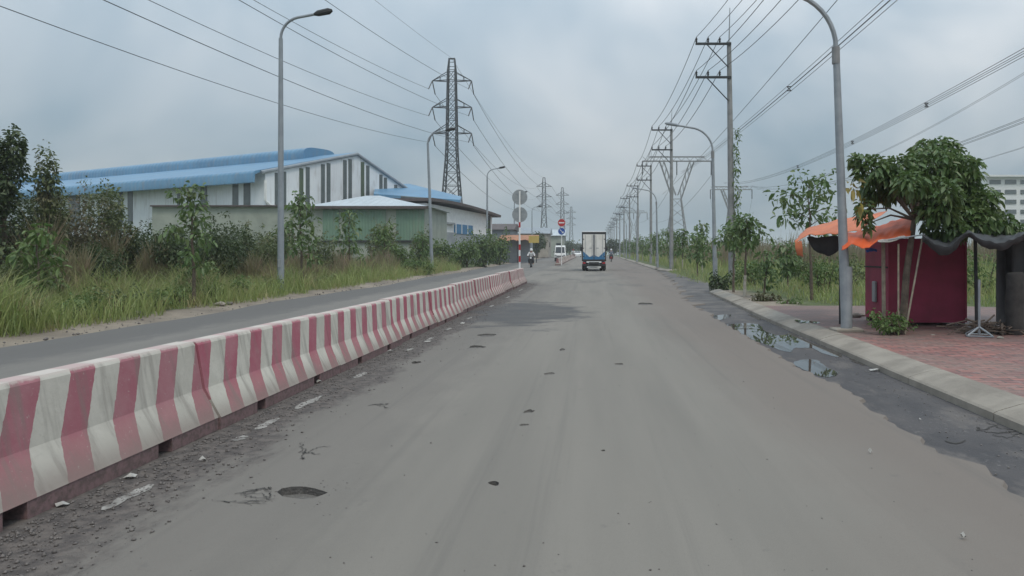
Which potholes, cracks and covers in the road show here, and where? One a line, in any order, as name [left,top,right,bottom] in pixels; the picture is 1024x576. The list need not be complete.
crack [944,422,1021,444]
pothole [277,486,328,499]
crack [216,487,276,504]
